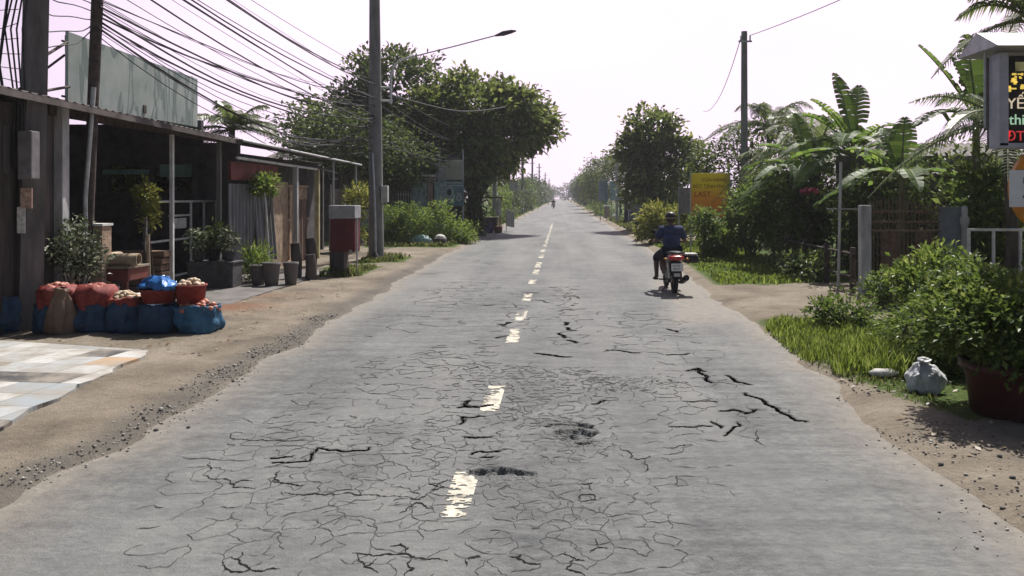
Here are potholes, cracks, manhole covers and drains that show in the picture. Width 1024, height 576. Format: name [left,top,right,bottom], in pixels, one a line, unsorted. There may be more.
crack [124,282,807,576]
pothole [468,468,539,486]
pothole [534,417,598,448]
